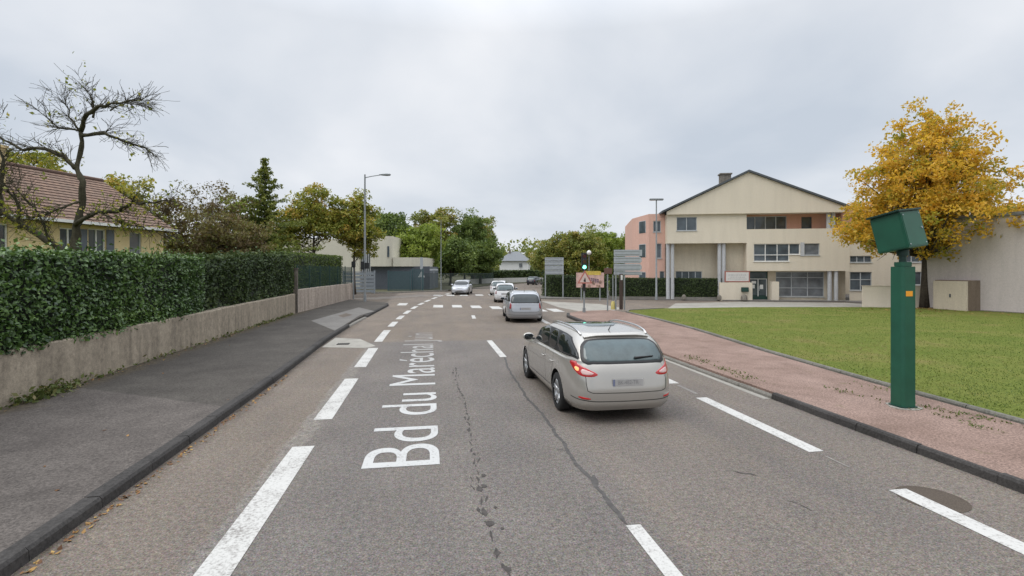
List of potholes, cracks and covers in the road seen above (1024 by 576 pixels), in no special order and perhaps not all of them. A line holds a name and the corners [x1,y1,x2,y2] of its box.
manhole cover [895,486,972,513]
crack [452,367,511,576]
